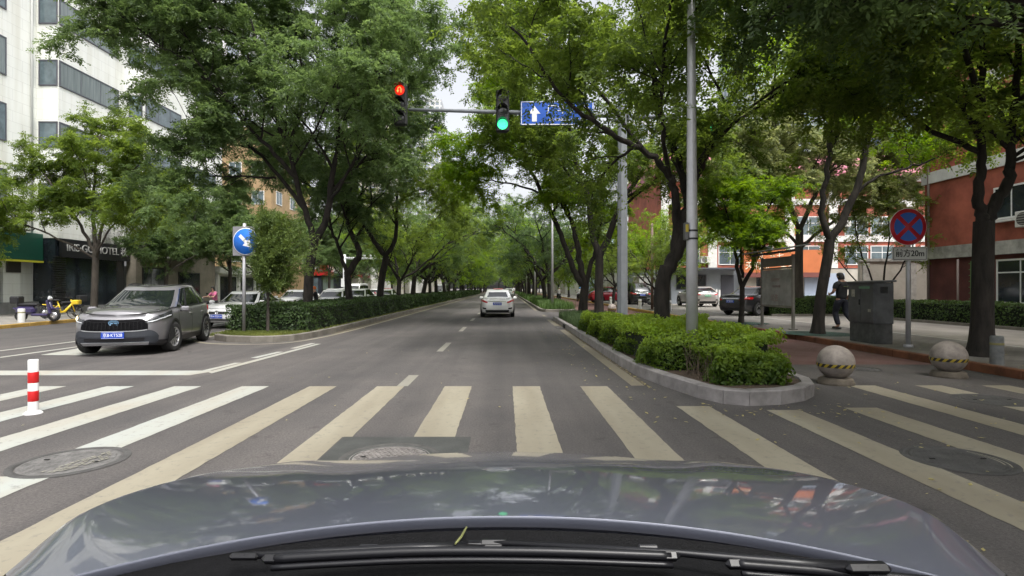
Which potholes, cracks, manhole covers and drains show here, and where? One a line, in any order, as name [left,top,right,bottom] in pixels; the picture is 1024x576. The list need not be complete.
manhole cover [899,445,1023,475]
manhole cover [338,443,440,461]
manhole cover [3,447,132,479]
